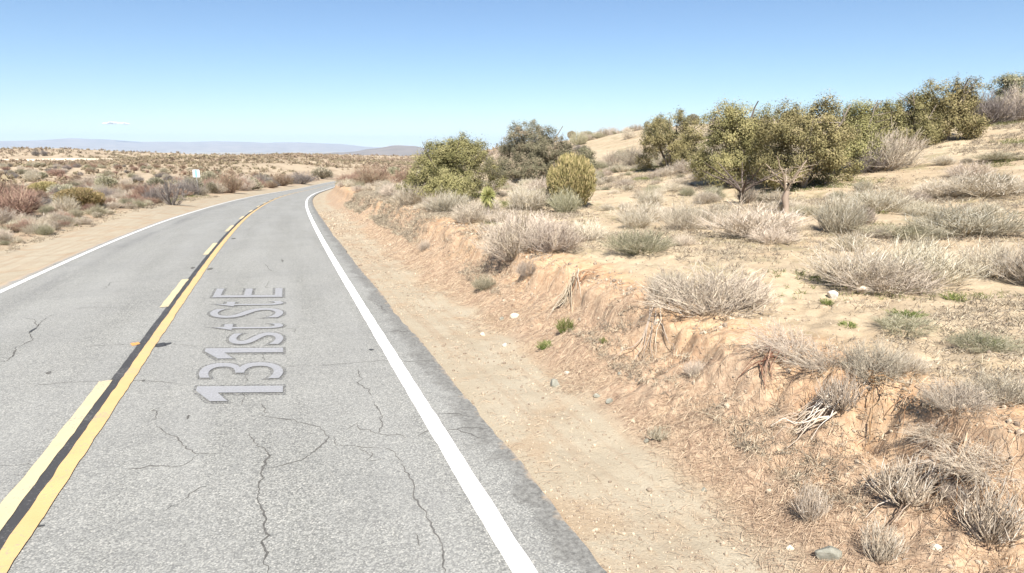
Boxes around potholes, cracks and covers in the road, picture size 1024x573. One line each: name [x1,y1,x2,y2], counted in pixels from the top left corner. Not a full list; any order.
crack [241,352,487,573]
crack [132,408,214,469]
